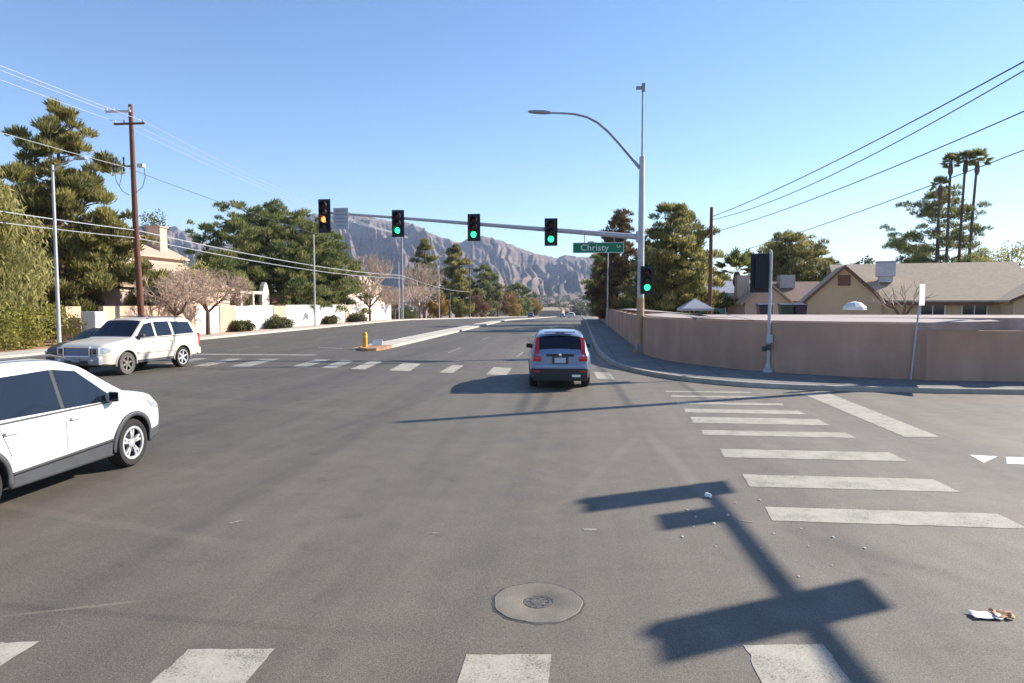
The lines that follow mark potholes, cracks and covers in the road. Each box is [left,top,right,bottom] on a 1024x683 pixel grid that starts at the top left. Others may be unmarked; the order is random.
manhole cover [491,582,586,625]
